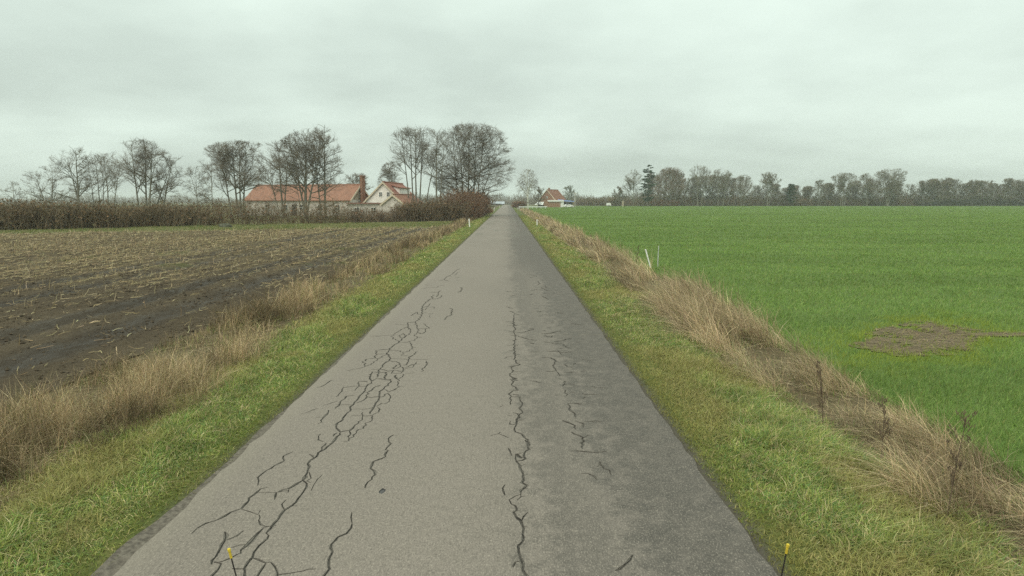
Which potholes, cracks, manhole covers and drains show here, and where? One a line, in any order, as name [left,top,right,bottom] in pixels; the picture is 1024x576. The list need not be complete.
crack [192,268,462,576]
crack [491,275,611,576]
